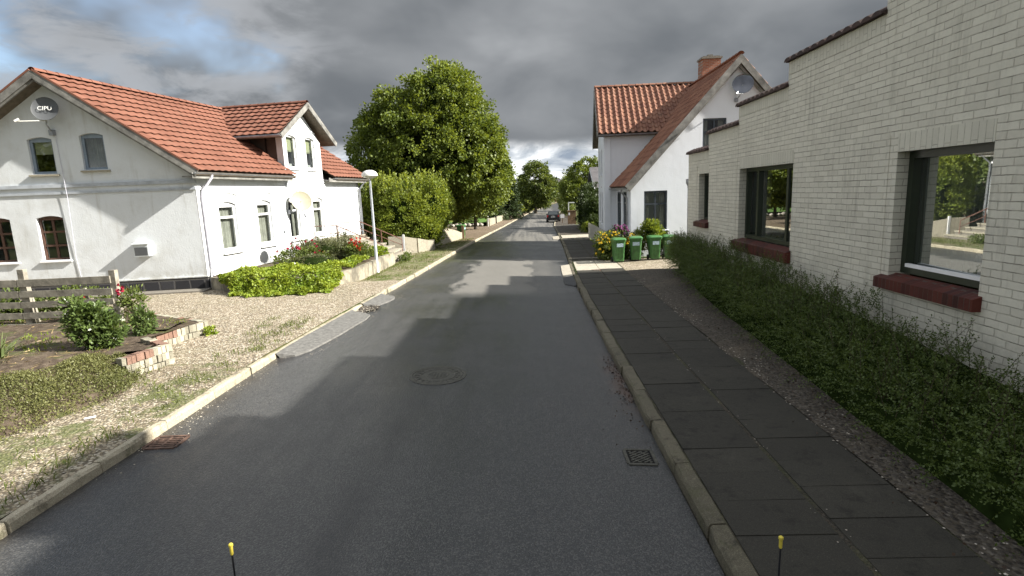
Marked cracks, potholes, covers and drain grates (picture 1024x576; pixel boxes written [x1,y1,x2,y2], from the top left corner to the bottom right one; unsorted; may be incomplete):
drain grate [141,435,190,450]
manhole cover [409,366,467,385]
drain grate [622,448,659,466]
